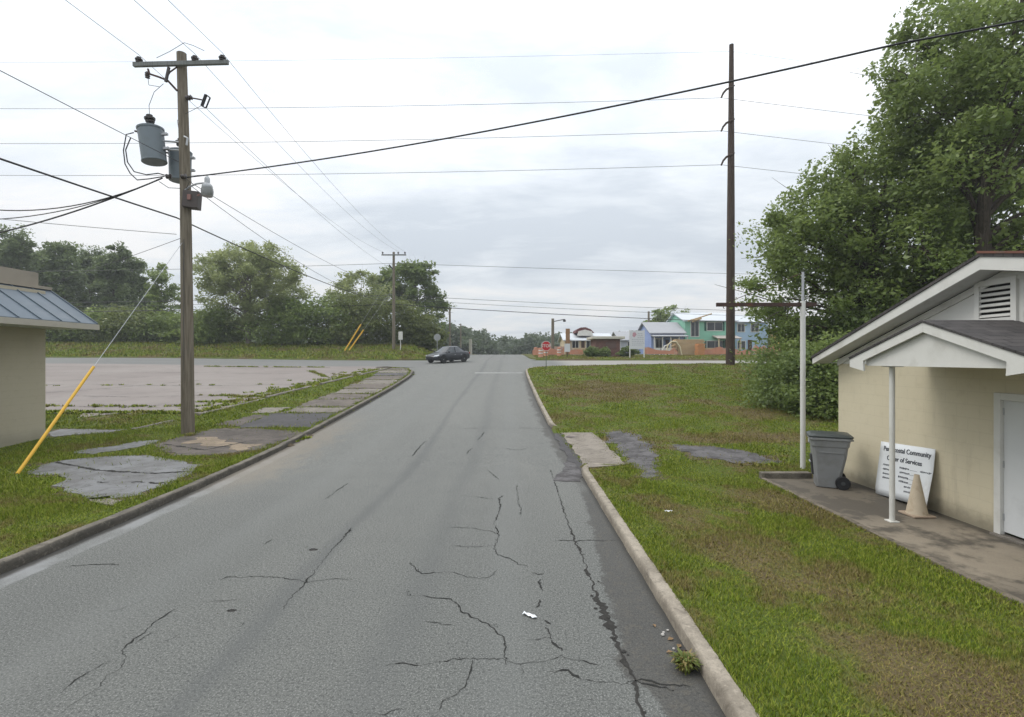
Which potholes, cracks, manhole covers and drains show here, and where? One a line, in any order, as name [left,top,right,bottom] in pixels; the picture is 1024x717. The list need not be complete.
crack [386,470,688,717]
crack [67,539,272,707]
